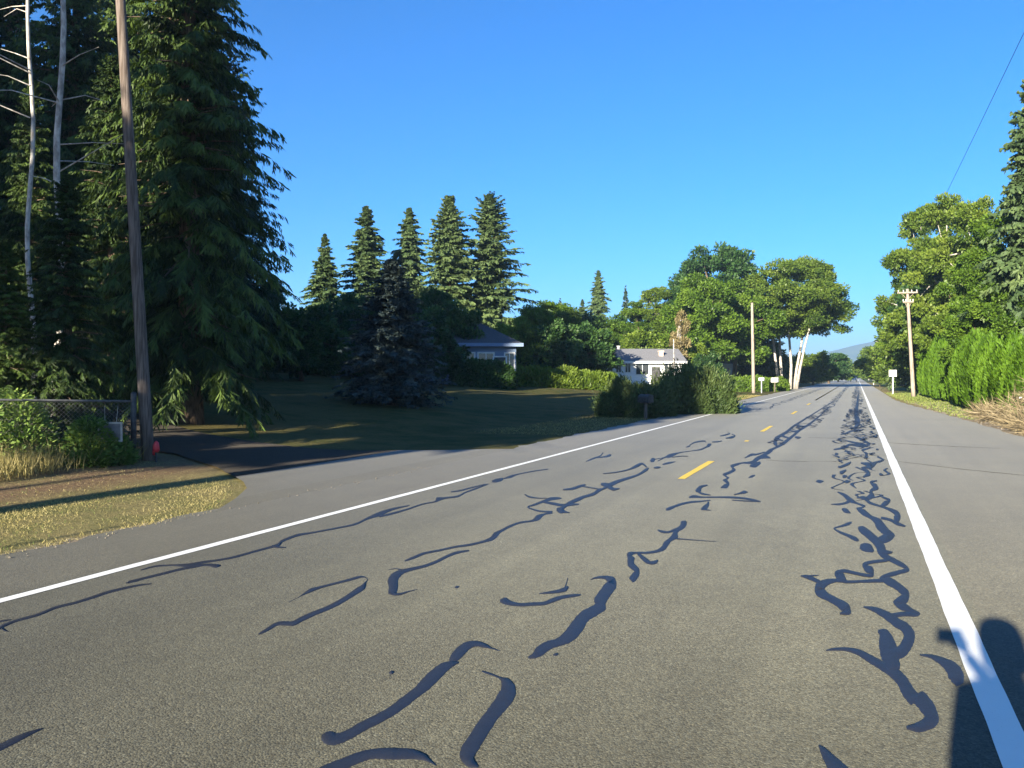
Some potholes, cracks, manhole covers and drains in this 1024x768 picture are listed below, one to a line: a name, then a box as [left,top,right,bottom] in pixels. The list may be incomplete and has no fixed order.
crack [773,393,1017,483]
